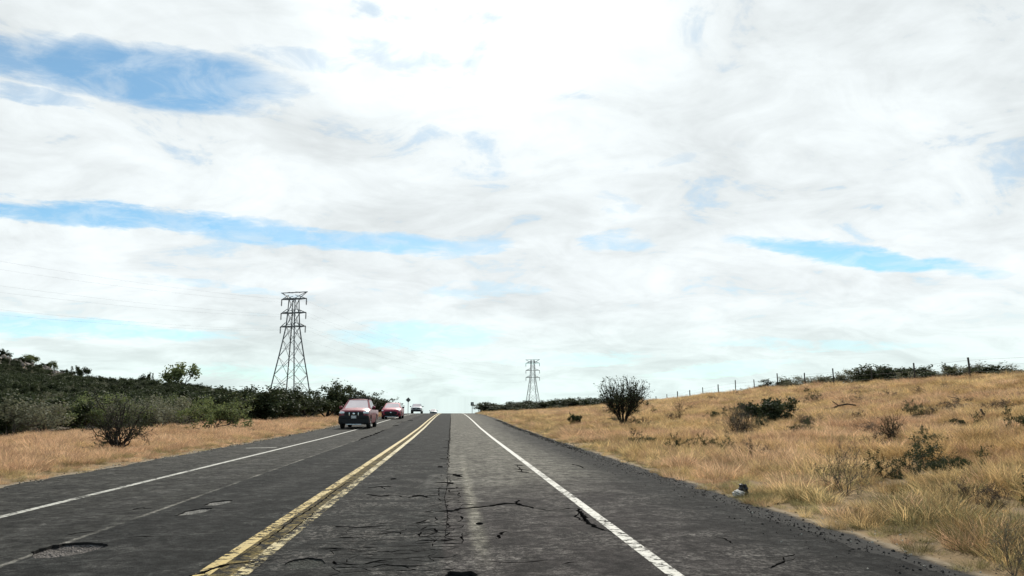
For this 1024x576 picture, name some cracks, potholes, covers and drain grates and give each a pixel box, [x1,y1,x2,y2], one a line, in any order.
pothole [31,542,108,558]
crack [189,416,611,576]
crack [765,554,795,568]
pothole [175,508,212,516]
